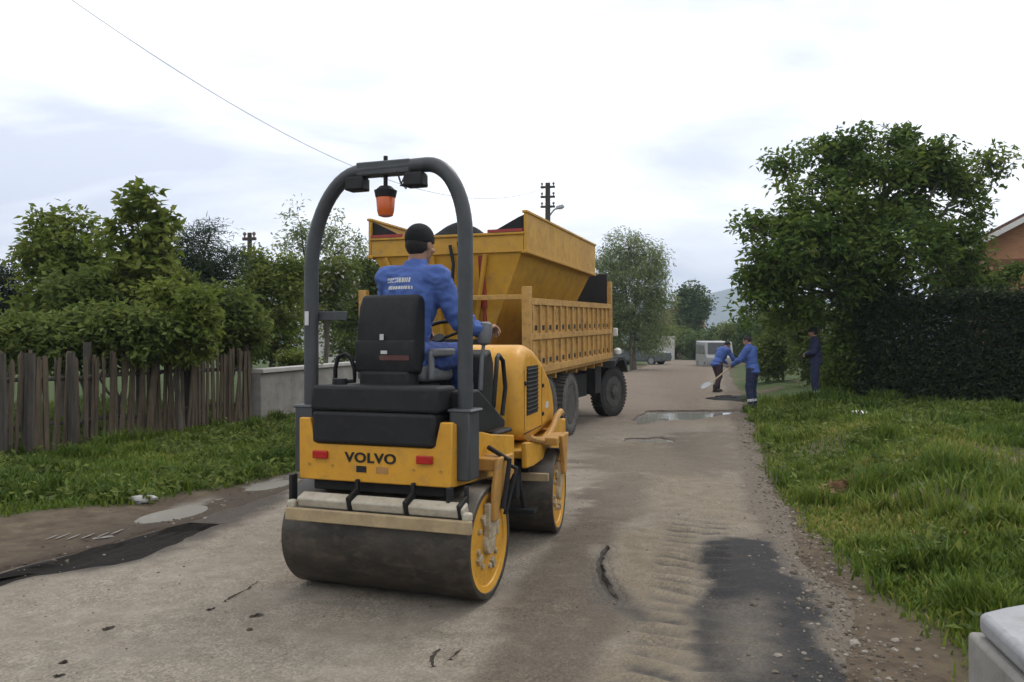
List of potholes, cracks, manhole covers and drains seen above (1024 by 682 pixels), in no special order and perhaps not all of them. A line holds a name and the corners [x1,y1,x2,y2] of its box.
crack [427,648,465,668]
pothole [627,410,743,425]
crack [222,581,260,602]
pothole [620,437,679,445]
